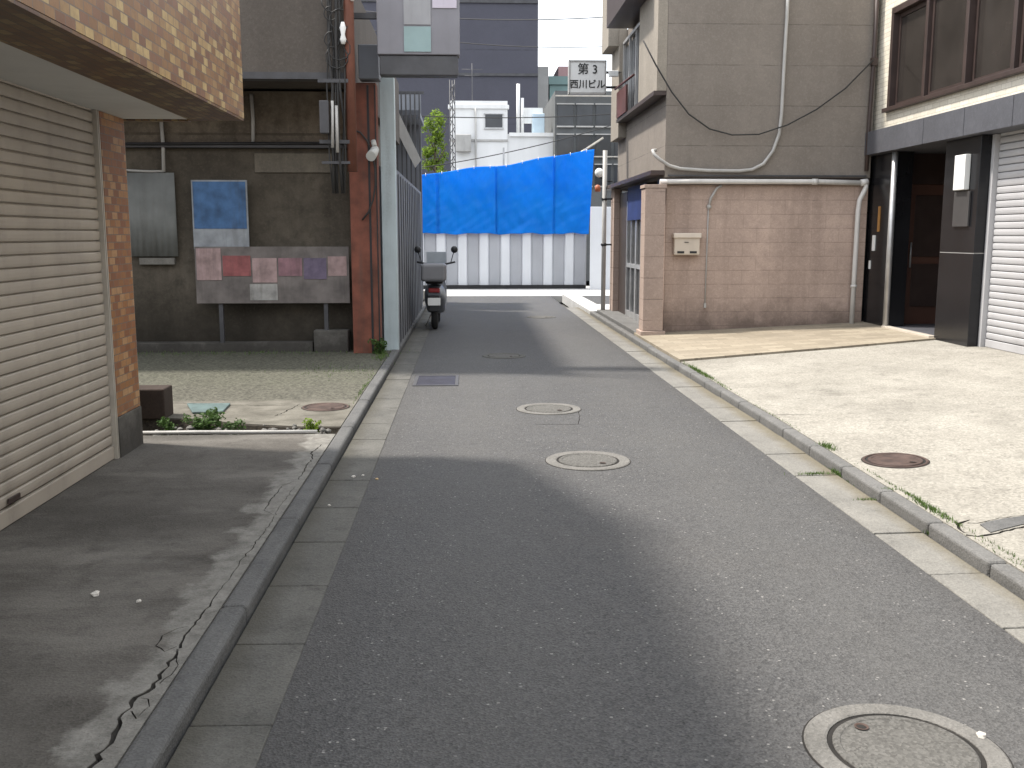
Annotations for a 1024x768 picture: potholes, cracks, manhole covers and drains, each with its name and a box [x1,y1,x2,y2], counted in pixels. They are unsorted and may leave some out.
crack [88,498,287,768]
manhole cover [802,704,1014,768]
drain grate [412,375,459,386]
manhole cover [516,403,582,415]
manhole cover [545,451,631,471]
manhole cover [861,452,930,468]
manhole cover [301,402,350,411]
